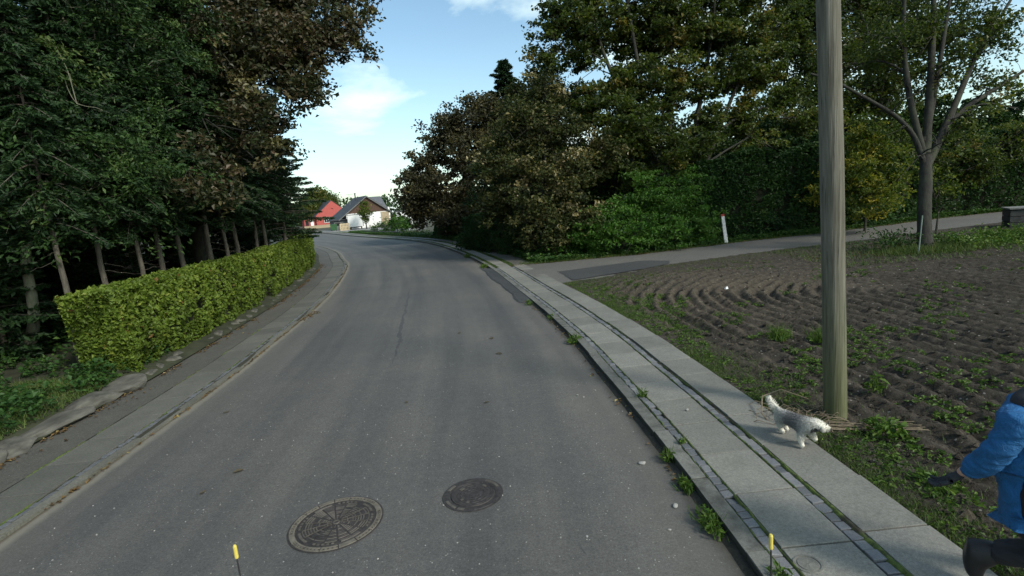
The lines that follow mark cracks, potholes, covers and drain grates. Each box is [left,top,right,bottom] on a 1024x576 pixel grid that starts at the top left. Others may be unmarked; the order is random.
manhole cover [442,478,503,512]
manhole cover [287,496,384,553]
